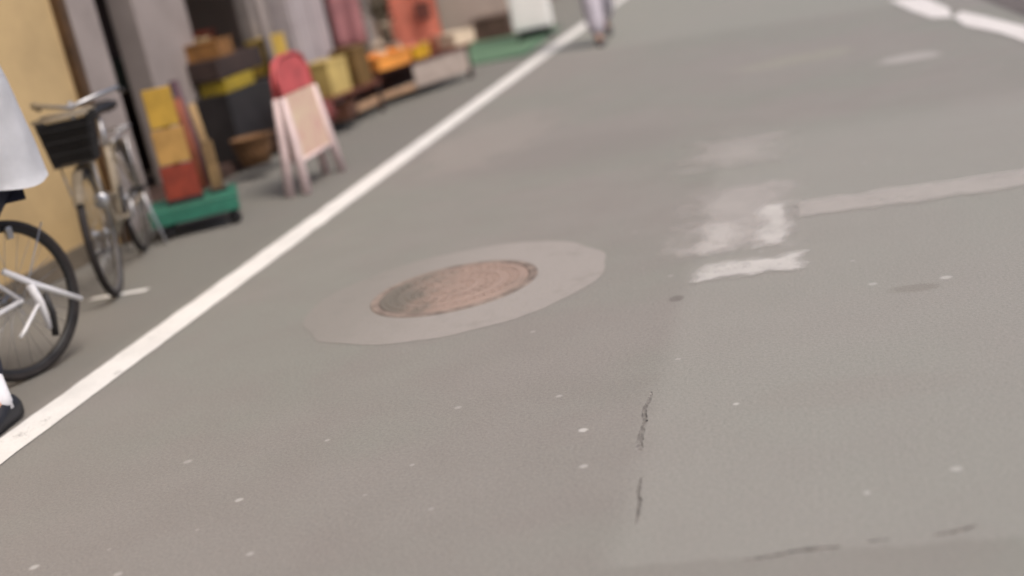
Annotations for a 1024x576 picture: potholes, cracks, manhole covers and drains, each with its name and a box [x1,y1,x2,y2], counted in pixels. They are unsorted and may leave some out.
crack [741,524,977,561]
crack [635,392,653,525]
manhole cover [303,241,606,345]
